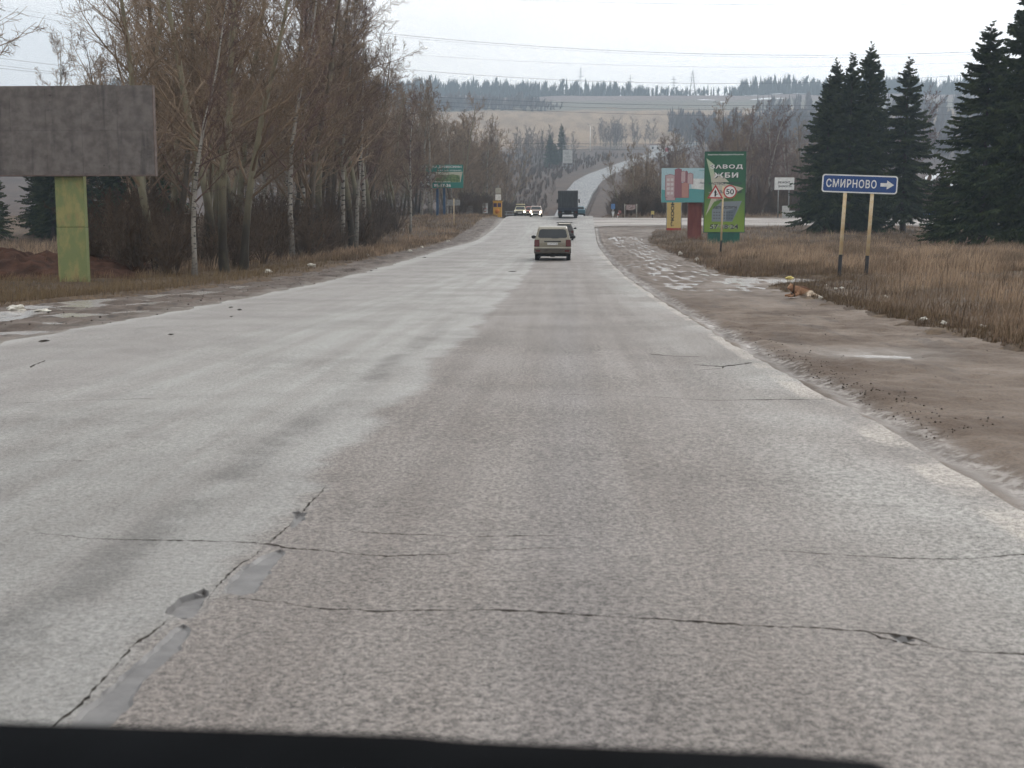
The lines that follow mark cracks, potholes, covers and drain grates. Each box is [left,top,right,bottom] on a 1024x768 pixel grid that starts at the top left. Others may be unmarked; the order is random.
crack [652,354,752,370]
crack [40,486,1024,724]
